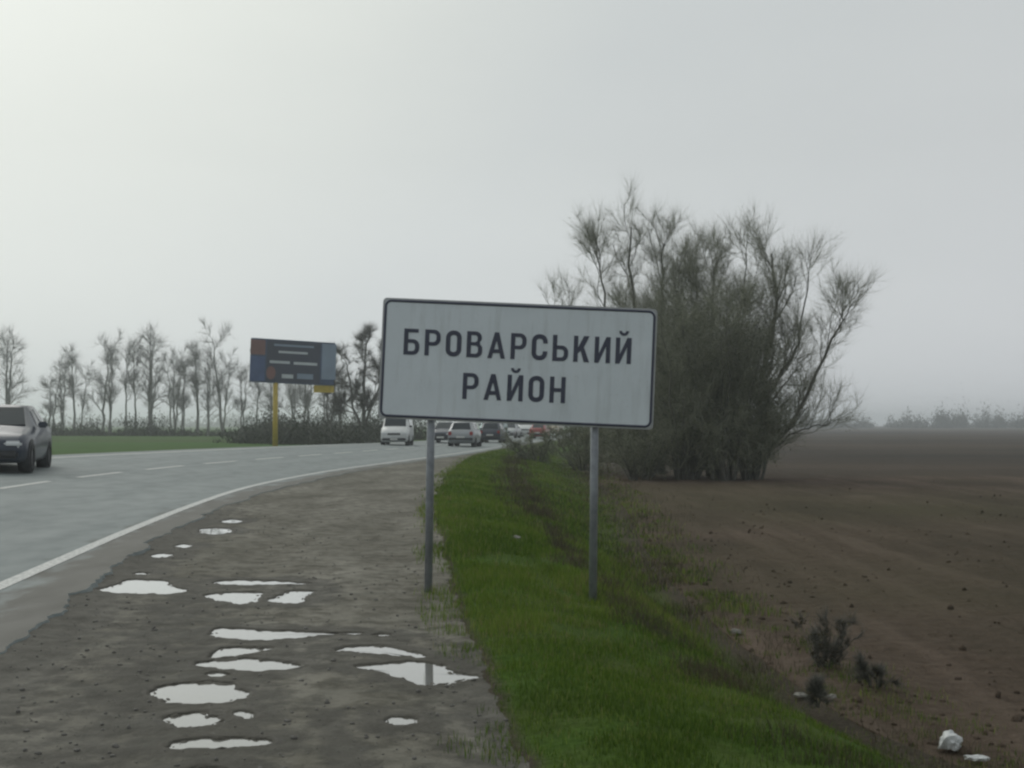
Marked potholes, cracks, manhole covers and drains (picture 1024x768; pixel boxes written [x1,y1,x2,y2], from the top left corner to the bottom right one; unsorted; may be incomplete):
pothole [141,678,257,706]
pothole [199,590,269,604]
pothole [208,578,318,586]
pothole [348,659,485,687]
pothole [328,643,436,659]
pothole [202,626,366,642]
pothole [187,655,310,673]
pothole [93,578,196,595]
pothole [375,714,428,727]
pothole [201,645,281,661]
pothole [195,527,235,535]
pothole [153,709,244,729]
